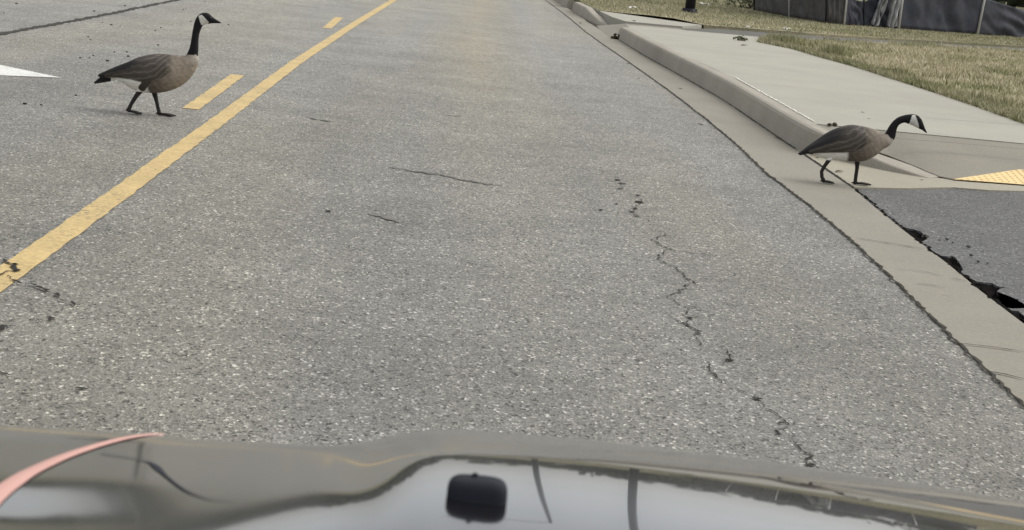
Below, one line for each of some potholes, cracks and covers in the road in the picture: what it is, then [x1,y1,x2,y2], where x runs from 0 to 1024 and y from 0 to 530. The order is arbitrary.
crack [0,258,79,331]
crack [615,176,813,467]
crack [547,1,1024,407]
